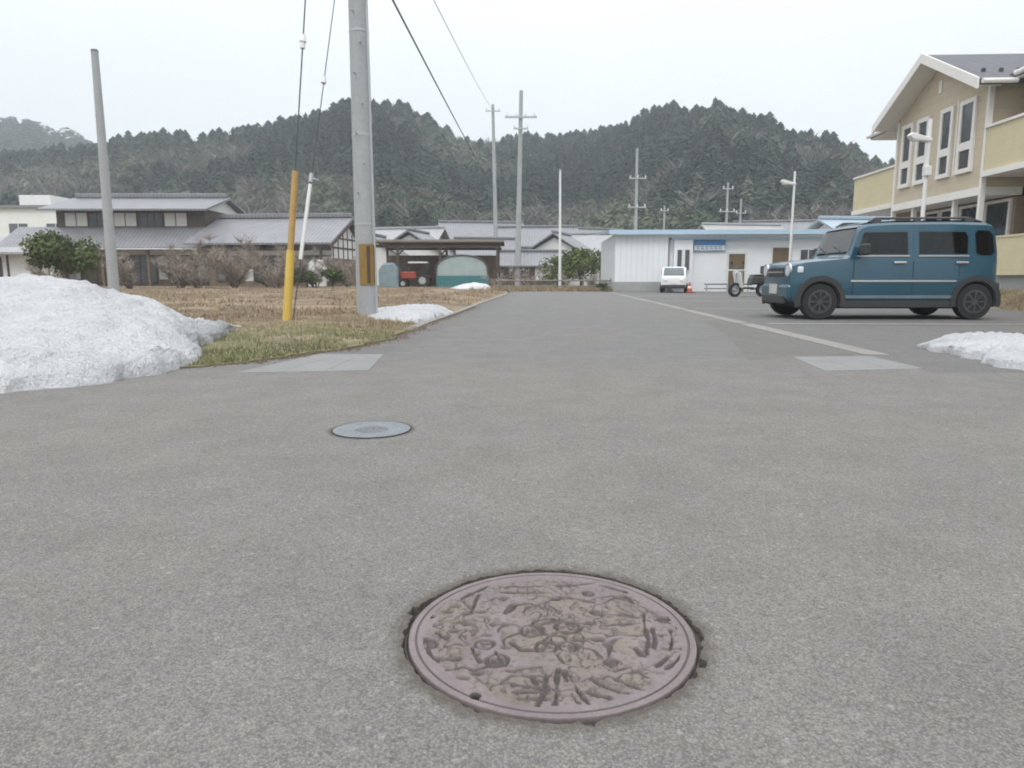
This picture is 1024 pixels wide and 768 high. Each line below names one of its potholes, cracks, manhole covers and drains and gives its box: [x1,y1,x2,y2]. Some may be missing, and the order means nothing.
manhole cover [331,421,412,439]
manhole cover [403,573,703,727]
